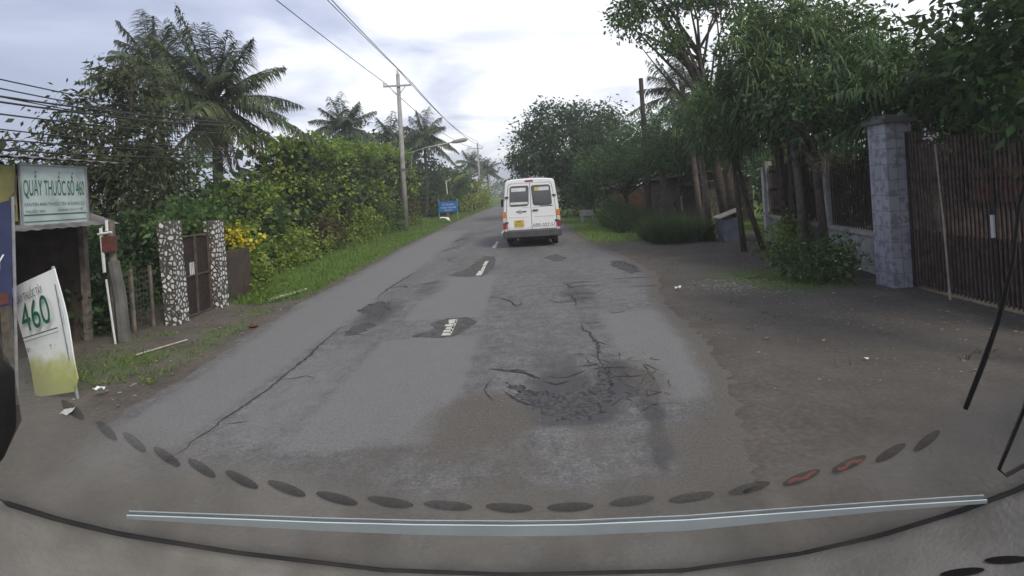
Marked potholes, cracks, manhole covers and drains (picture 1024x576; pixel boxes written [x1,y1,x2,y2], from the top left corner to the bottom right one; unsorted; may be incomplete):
crack [550,281,594,305]
crack [170,326,342,458]
crack [484,310,680,411]
pothole [504,367,616,422]
